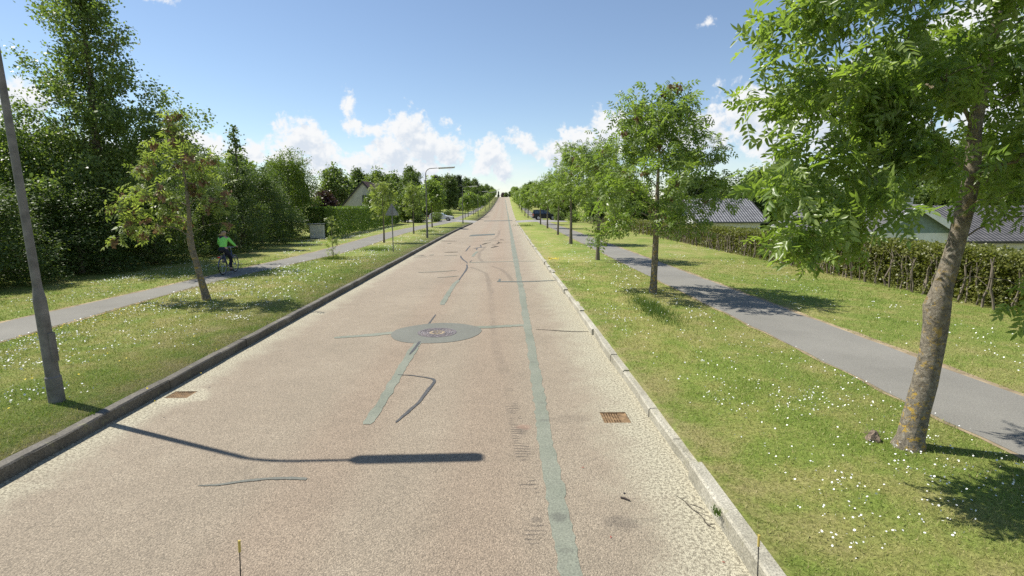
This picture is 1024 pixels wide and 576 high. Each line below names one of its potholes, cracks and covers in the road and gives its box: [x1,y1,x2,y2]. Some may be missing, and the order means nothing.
manhole cover [418,328,457,337]
crack [677,496,715,528]
drain grate [600,412,631,423]
